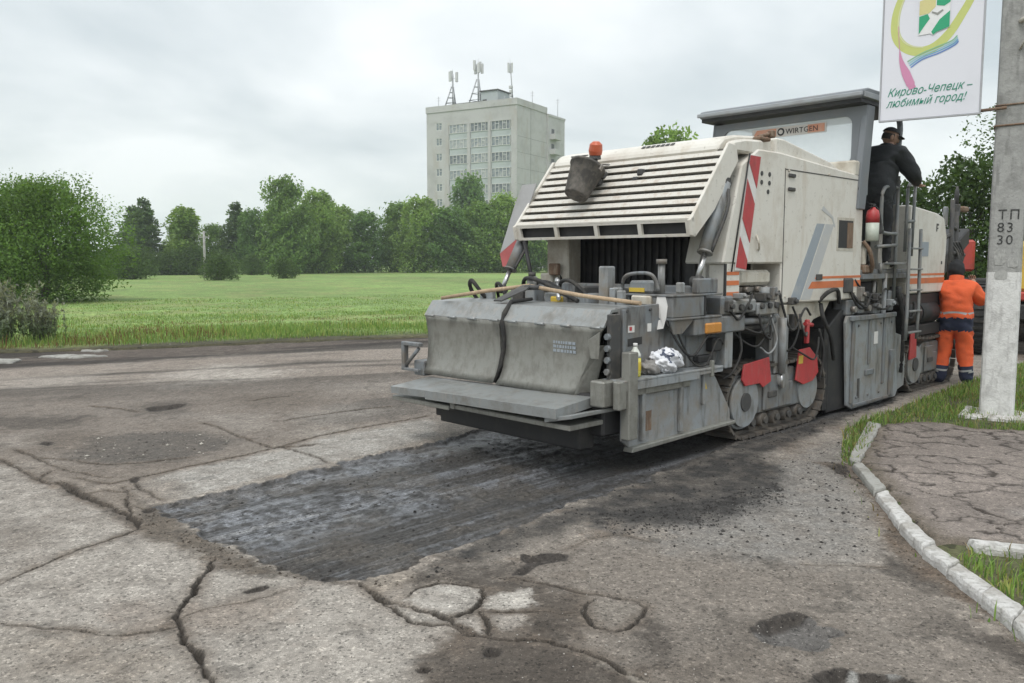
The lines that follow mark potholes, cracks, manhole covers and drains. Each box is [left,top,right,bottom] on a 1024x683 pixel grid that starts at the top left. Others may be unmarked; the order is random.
pothole [749,612,845,652]
crack [345,577,650,683]
crack [0,449,188,584]
crack [286,406,393,421]
pothole [512,553,569,576]
pothole [145,404,187,412]
crack [1,559,288,683]
